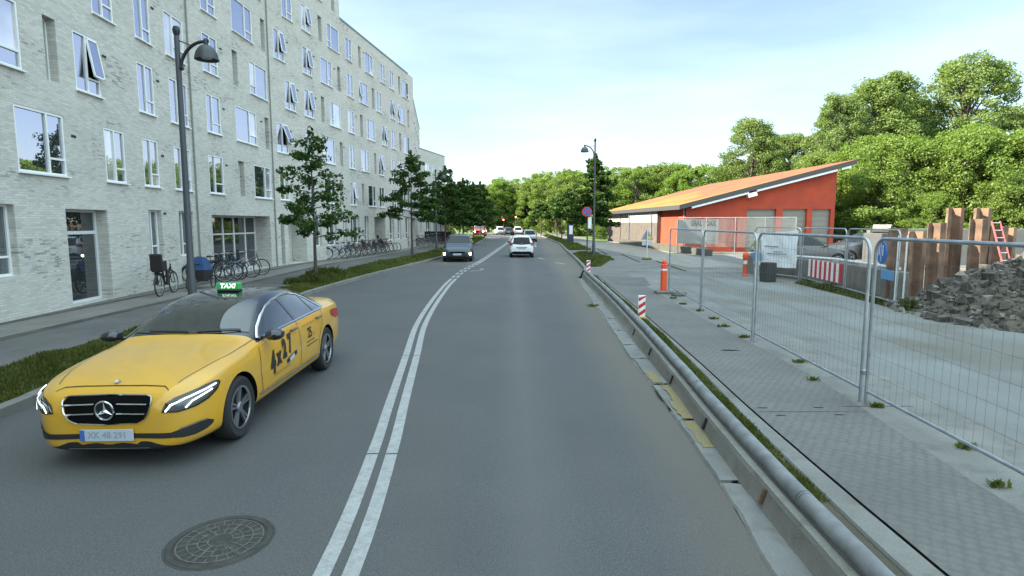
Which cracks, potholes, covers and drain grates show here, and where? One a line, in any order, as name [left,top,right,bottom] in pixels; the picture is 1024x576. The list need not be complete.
manhole cover [161,515,276,571]
